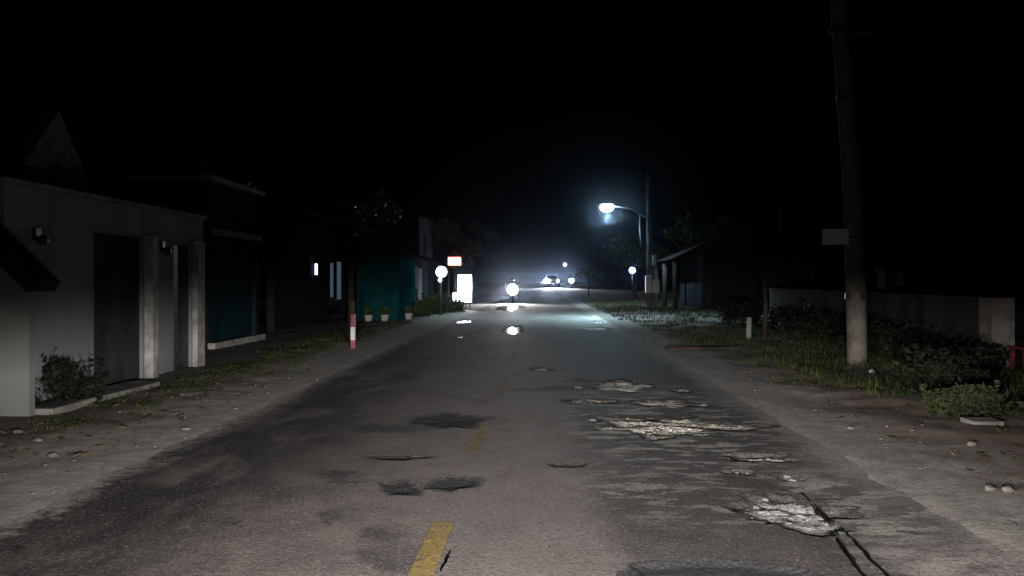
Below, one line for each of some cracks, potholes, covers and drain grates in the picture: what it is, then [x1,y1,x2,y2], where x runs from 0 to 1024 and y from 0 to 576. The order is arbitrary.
pothole [587,378,660,393]
pothole [716,452,804,463]
pothole [415,475,487,494]
pothole [721,492,865,539]
crack [803,493,890,576]
pothole [377,479,426,497]
pothole [620,398,719,409]
pothole [581,414,781,442]
